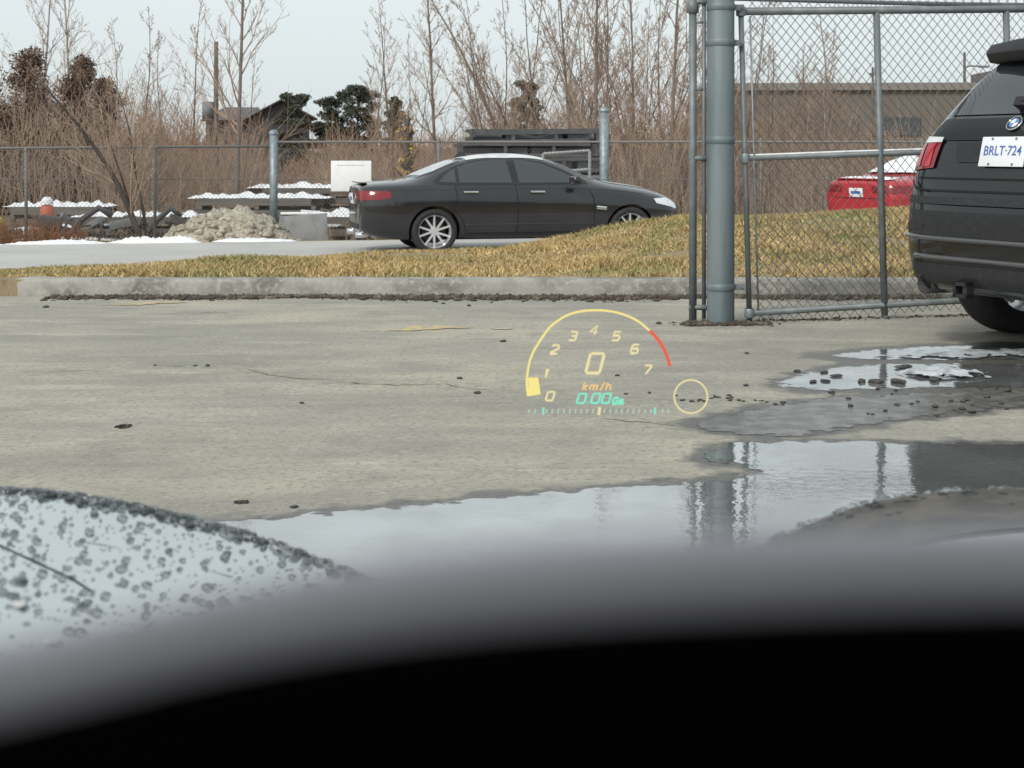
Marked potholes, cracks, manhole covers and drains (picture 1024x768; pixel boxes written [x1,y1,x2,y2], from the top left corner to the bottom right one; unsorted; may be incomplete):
crack [243,368,509,391]
